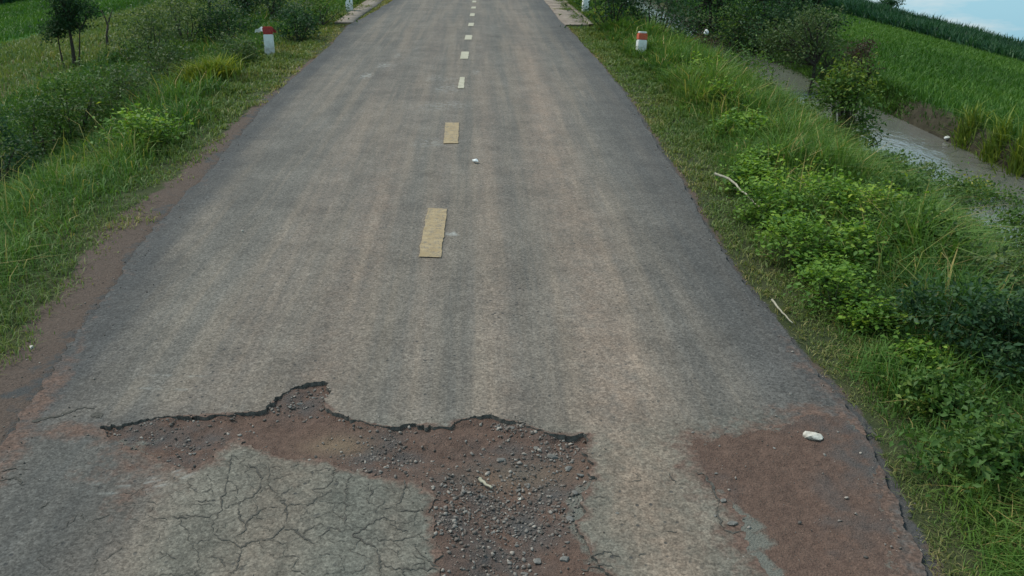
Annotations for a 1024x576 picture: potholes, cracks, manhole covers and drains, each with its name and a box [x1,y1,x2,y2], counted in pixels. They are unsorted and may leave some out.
crack [31,406,103,422]
crack [0,467,38,485]
crack [37,454,439,576]
pothole [100,381,612,576]
